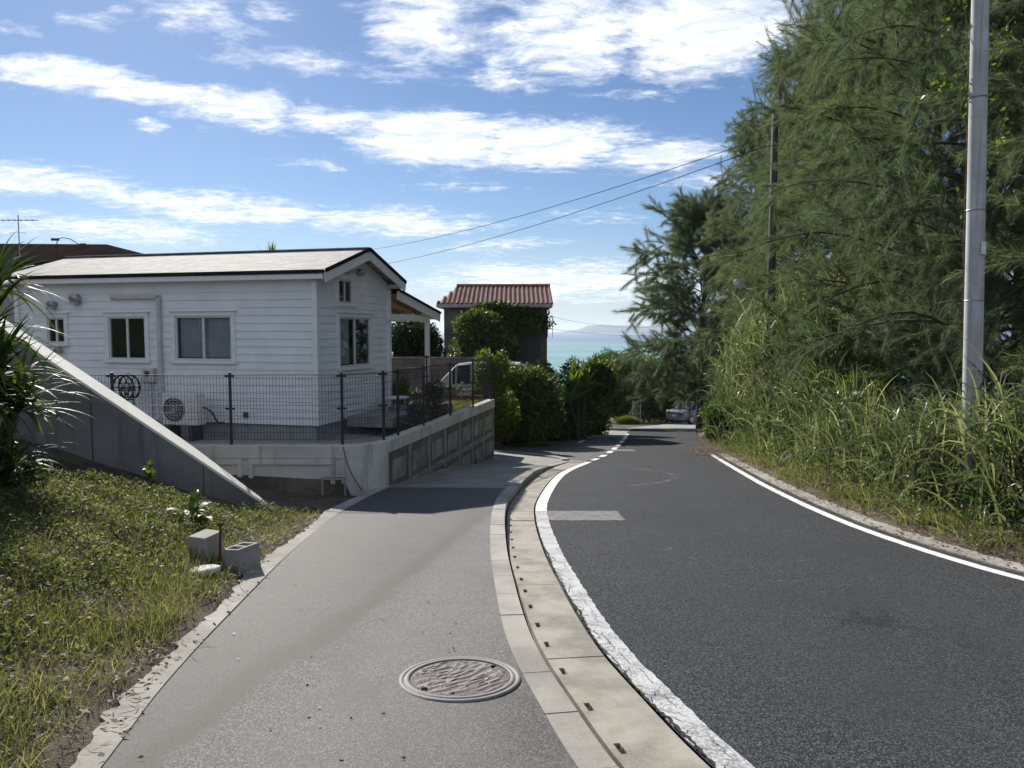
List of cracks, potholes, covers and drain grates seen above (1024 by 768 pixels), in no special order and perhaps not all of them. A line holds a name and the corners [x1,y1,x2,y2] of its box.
manhole cover [398,656,521,703]
